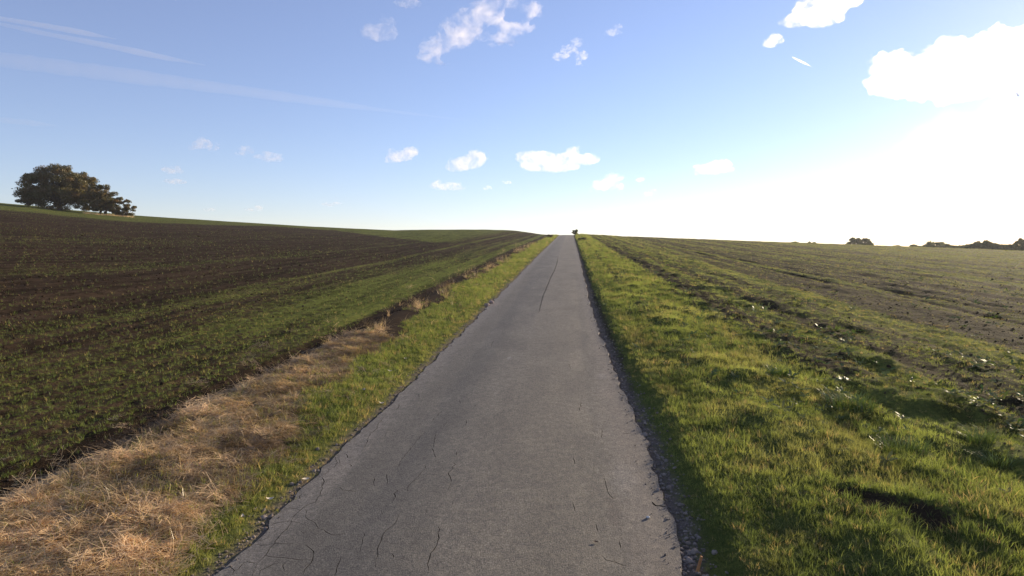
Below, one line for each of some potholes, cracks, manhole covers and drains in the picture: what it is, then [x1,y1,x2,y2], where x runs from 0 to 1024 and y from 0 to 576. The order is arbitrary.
crack [228,403,400,575]
crack [360,412,457,567]
